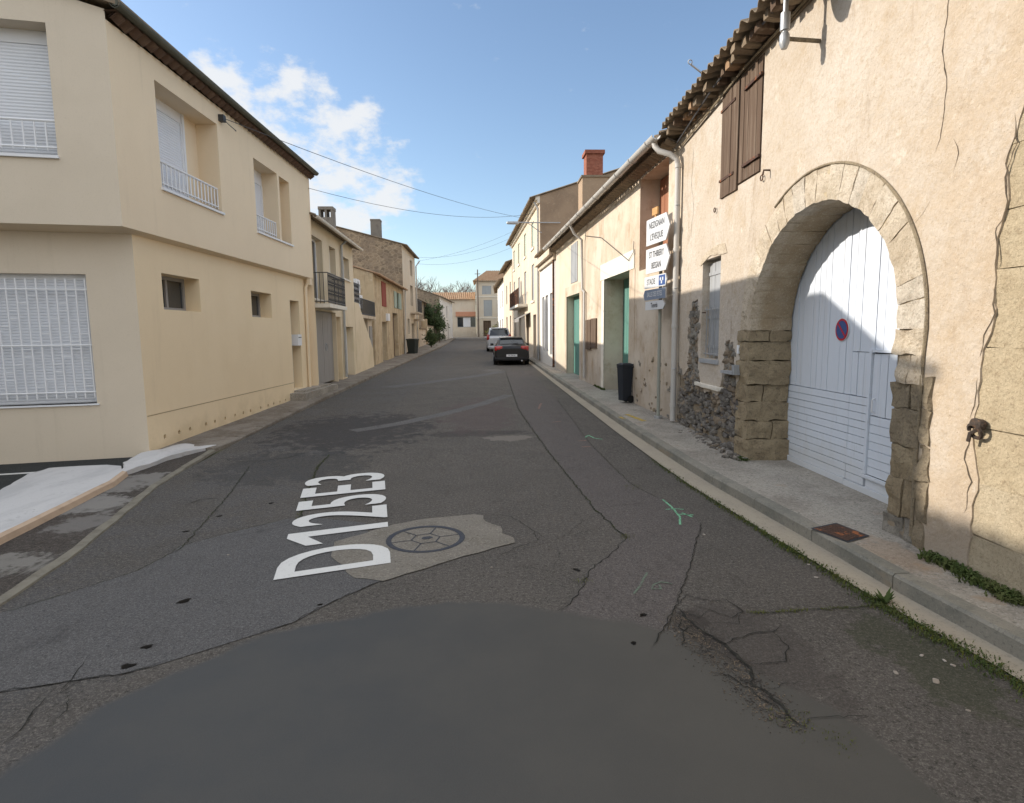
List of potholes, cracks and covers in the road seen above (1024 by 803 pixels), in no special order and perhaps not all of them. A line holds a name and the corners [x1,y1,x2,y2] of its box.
crack [258,582,409,634]
crack [501,502,669,584]
manhole cover [386,526,465,553]
utility cover [811,523,869,542]
crack [0,659,166,745]
crack [655,525,876,728]
